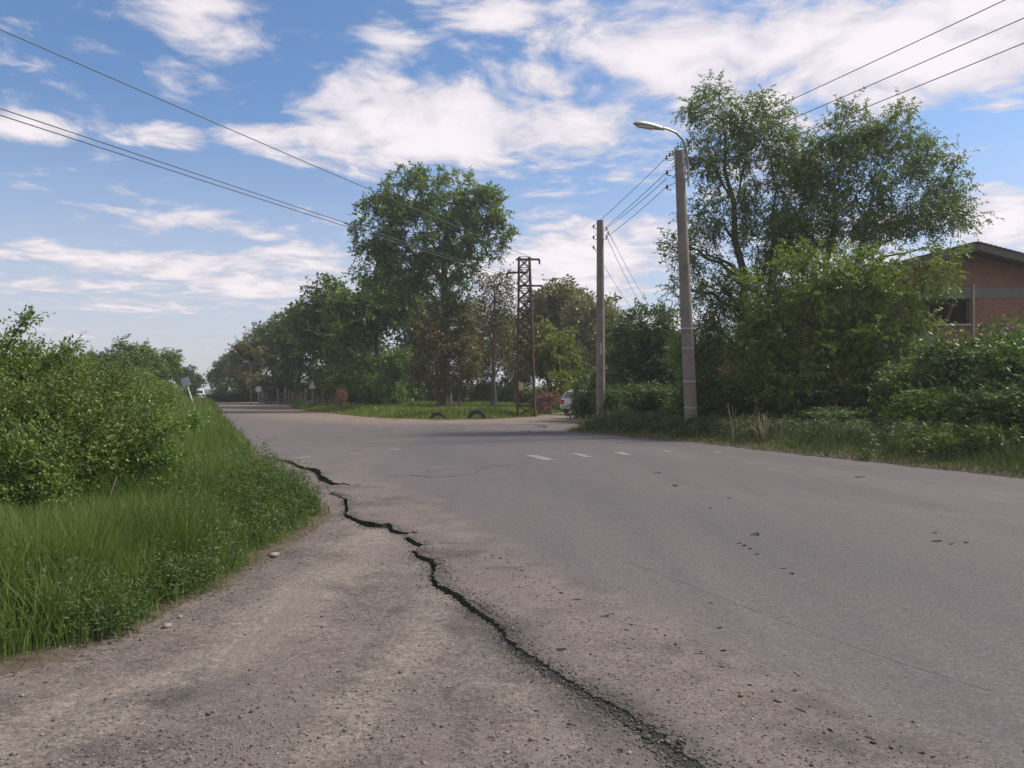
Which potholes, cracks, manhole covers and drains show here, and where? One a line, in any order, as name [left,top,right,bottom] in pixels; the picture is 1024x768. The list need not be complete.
crack [286,461,925,768]
